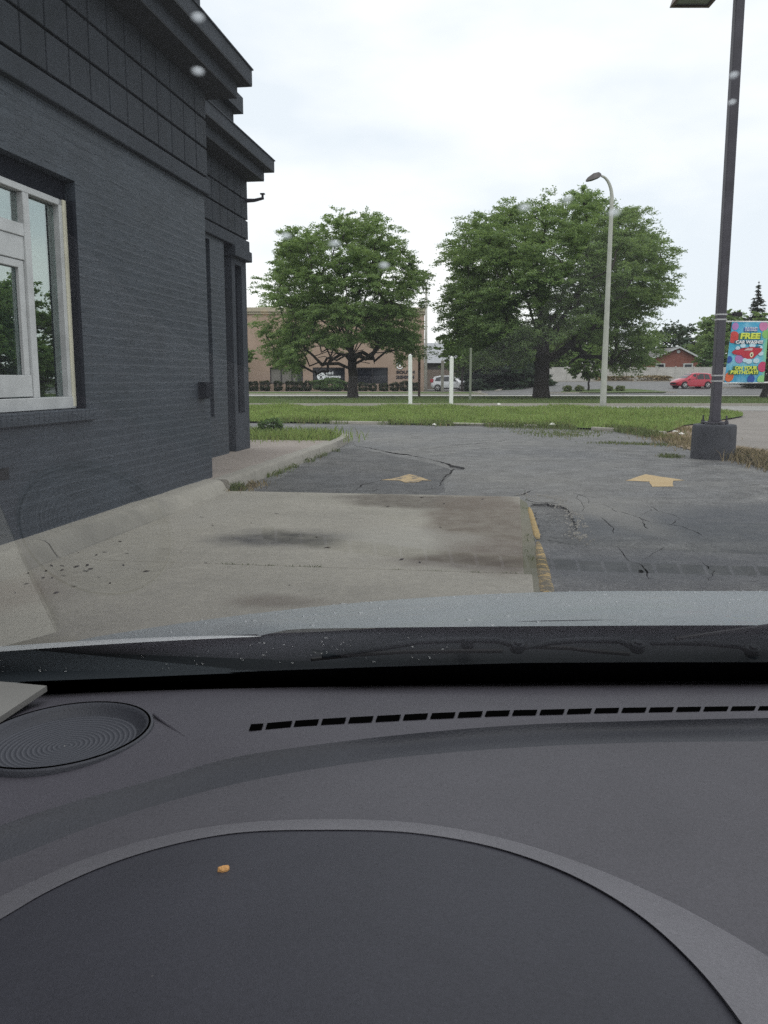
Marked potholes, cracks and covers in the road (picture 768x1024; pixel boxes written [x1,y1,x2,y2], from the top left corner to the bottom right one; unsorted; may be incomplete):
pothole [528,500,578,544]
crack [516,488,701,535]
crack [359,440,505,489]
